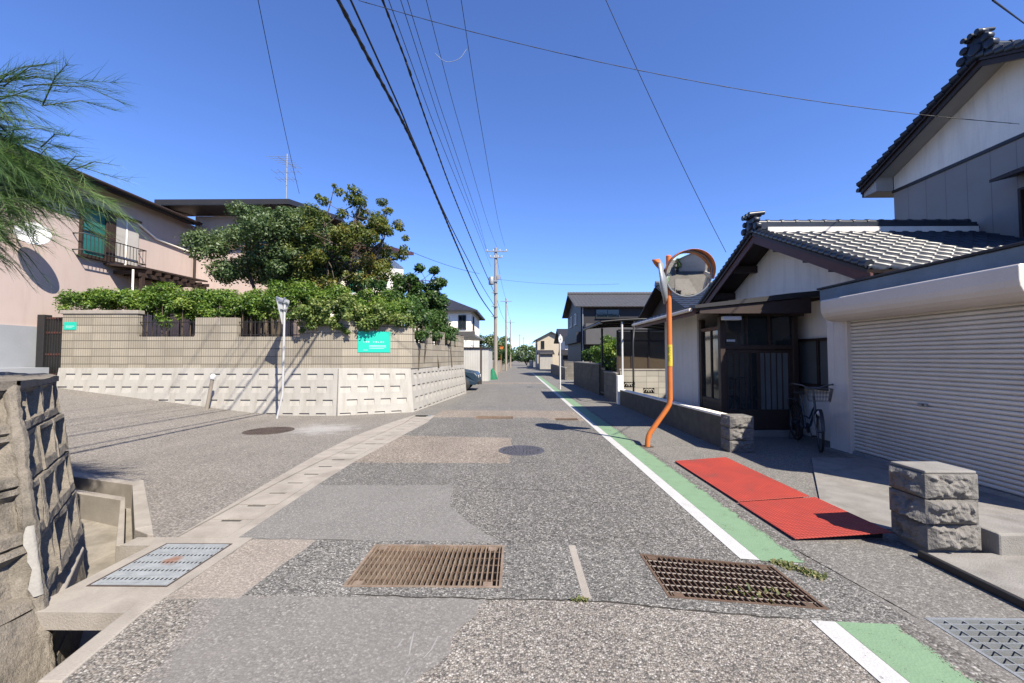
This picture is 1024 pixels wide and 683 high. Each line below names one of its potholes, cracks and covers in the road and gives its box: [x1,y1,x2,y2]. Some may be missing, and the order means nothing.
manhole cover [499,445,544,456]
drain grate [342,544,505,588]
crack [351,594,799,619]
drain grate [924,617,1024,681]
drain grate [639,553,829,610]
manhole cover [242,427,295,435]
drain grate [87,543,233,631]
